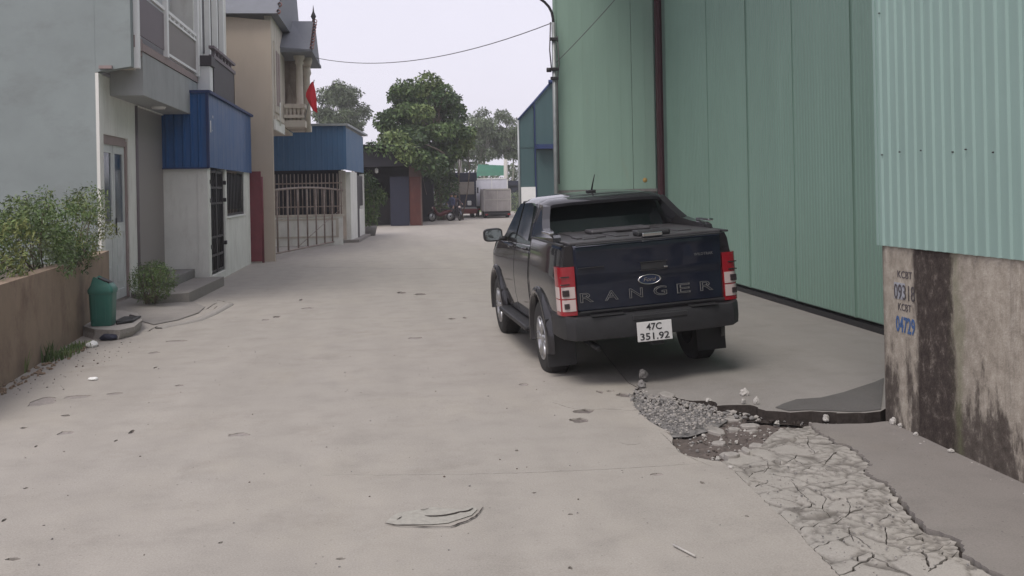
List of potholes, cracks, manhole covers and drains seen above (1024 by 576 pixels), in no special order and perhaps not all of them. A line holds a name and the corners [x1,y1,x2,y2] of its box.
pothole [29,397,56,406]
pothole [672,419,803,461]
crack [890,495,963,567]
